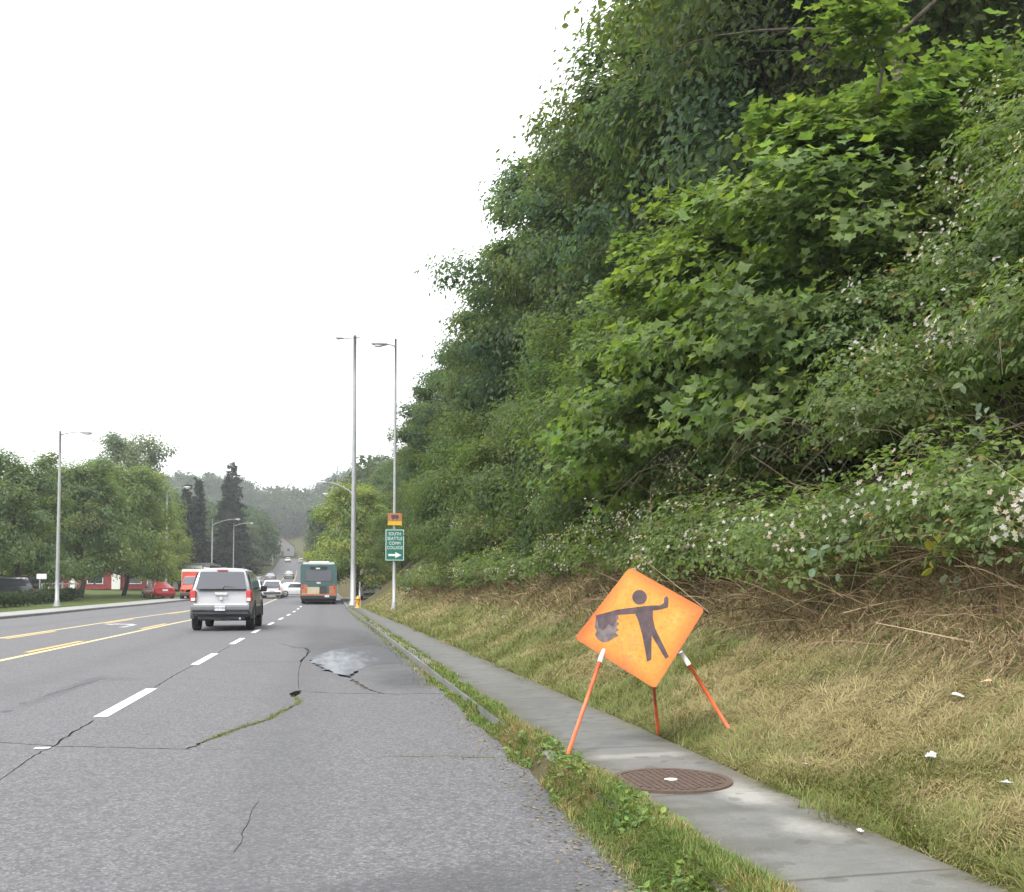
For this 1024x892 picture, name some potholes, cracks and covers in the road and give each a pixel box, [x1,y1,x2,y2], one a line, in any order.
crack [0,643,445,780]
manhole cover [612,768,733,794]
crack [233,802,258,853]
